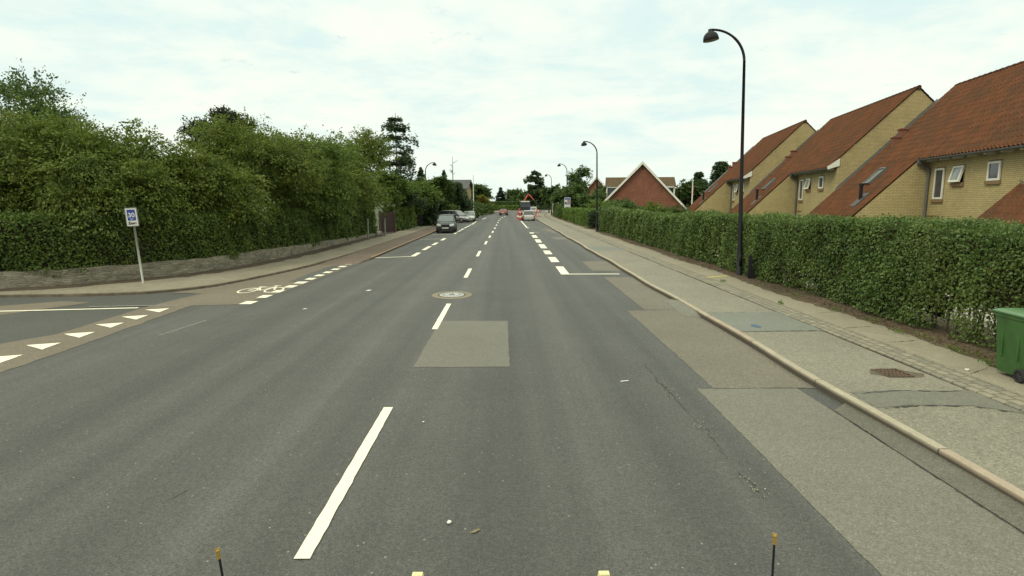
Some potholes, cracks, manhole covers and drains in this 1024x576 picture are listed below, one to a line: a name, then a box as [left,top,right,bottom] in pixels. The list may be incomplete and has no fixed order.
crack [644,364,726,455]
manhole cover [432,291,472,299]
drain grate [869,368,924,378]
